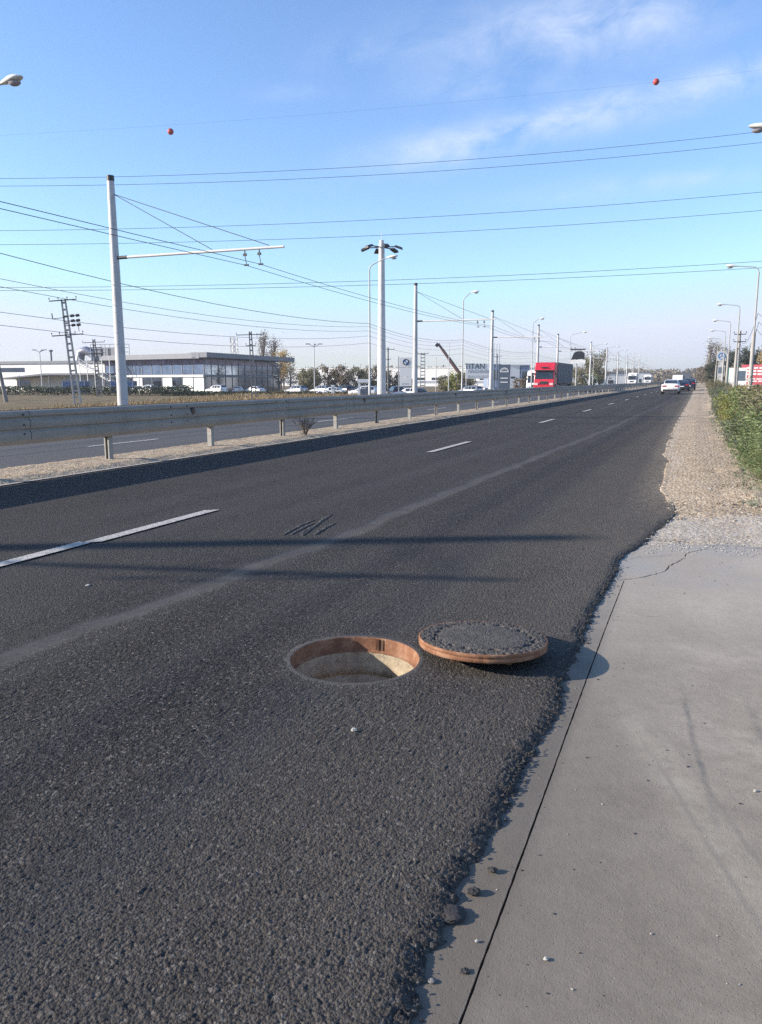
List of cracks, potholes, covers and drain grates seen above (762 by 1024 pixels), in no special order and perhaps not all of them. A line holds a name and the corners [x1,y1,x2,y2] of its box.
manhole cover [283,635,425,686]
manhole cover [419,621,548,665]
